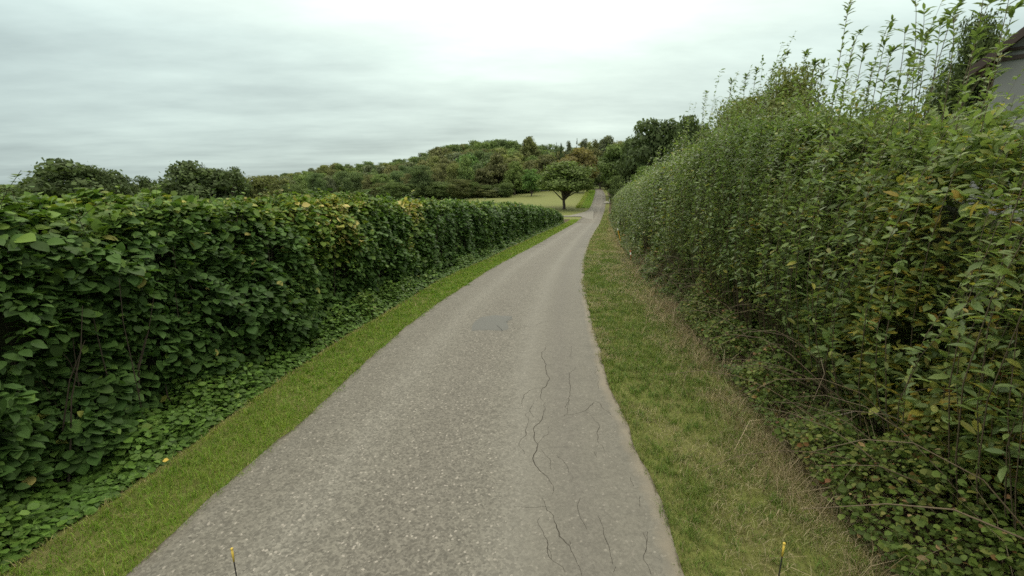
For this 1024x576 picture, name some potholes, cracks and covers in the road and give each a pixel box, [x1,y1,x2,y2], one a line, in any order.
crack [515,352,616,575]
